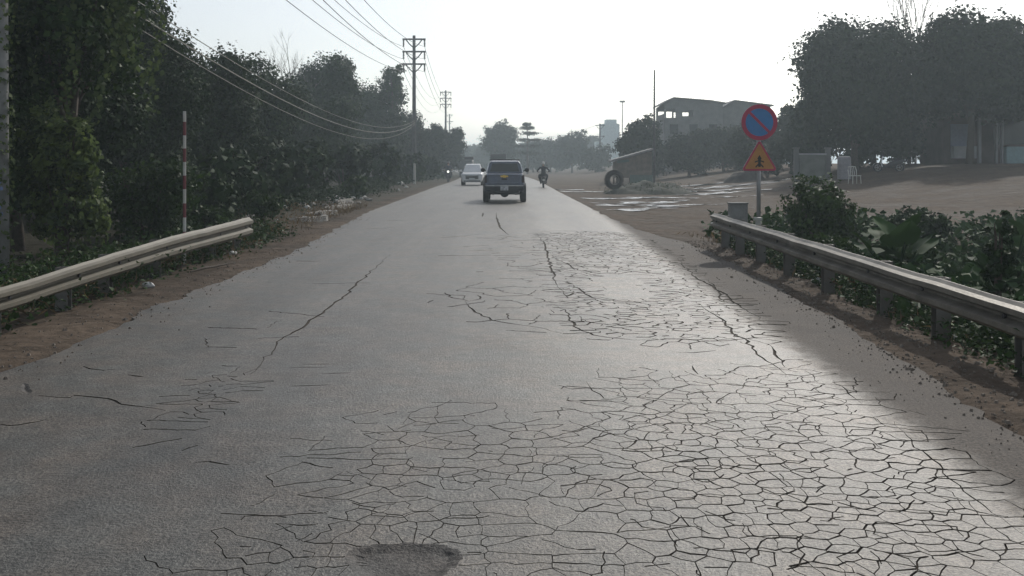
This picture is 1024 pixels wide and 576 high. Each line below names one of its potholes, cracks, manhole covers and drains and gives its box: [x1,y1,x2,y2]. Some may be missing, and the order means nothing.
pothole [345,542,463,576]
crack [426,213,790,374]
crack [38,254,390,451]
crack [144,359,1024,576]
